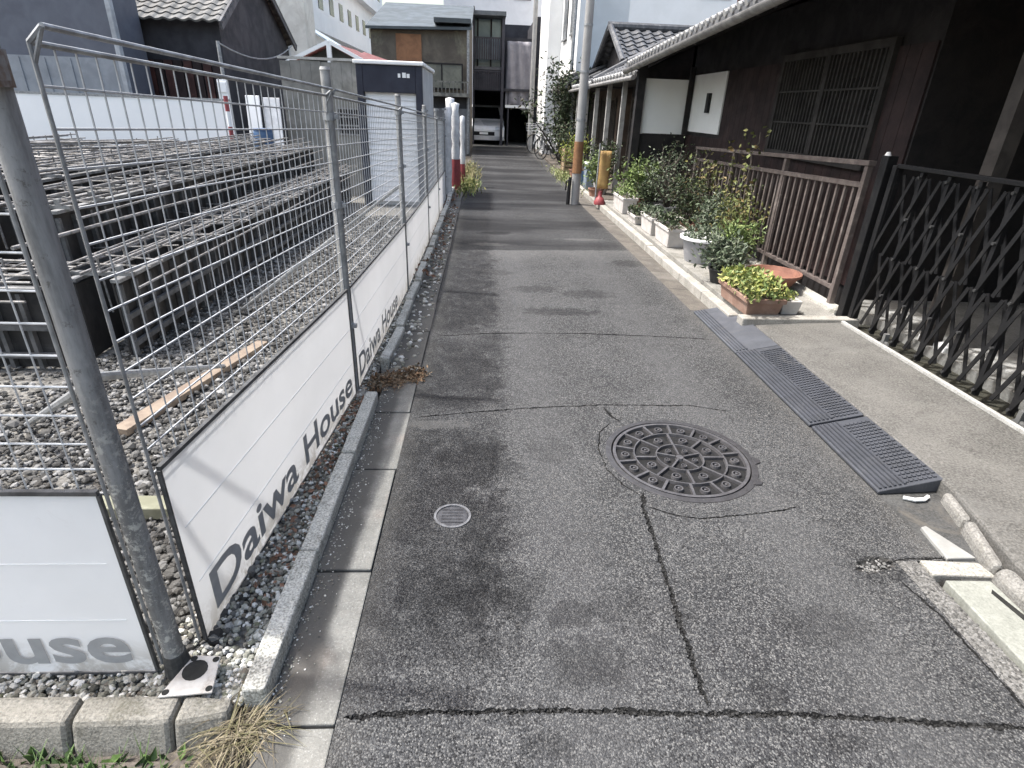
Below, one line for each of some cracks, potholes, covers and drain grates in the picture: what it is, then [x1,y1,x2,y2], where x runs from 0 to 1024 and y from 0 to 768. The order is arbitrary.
pothole [854,556,896,574]
manhole cover [605,420,763,503]
crack [344,403,1024,736]
utility cover [434,504,471,528]
